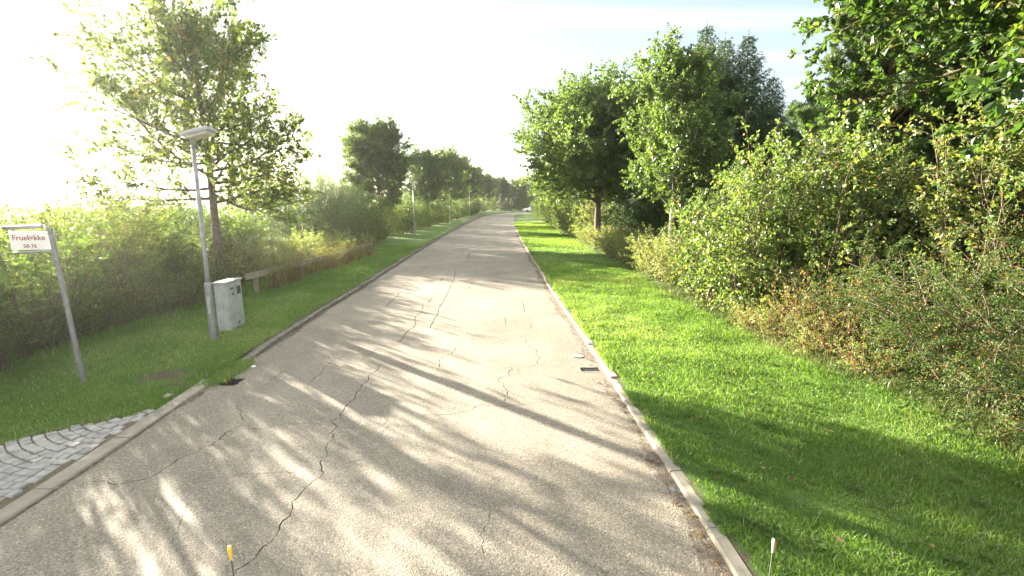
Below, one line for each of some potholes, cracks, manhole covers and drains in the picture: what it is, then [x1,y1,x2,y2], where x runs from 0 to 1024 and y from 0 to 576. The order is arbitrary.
crack [229,353,418,574]
crack [418,300,540,419]
crack [92,405,303,484]
pothole [218,373,246,386]
